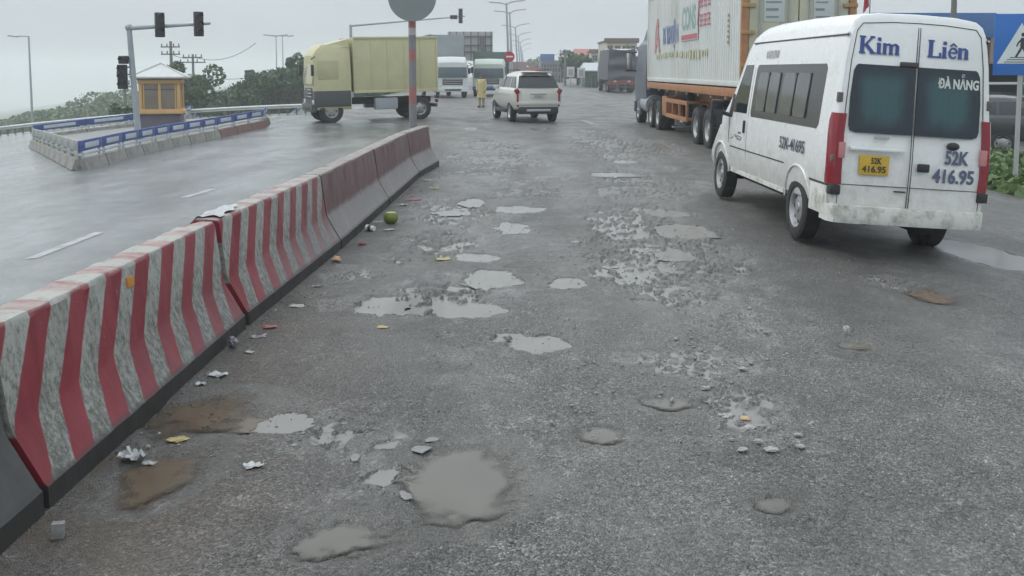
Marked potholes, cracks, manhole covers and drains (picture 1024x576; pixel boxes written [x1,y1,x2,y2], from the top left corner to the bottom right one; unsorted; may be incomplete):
pothole [733,489,815,518]
pothole [654,221,729,239]
pothole [252,406,324,437]
pothole [540,275,595,291]
pothole [455,266,531,293]
pothole [432,303,520,320]
pothole [249,508,428,567]
pothole [348,301,411,318]
pothole [623,392,712,415]
pothole [360,426,559,544]
pothole [496,332,579,356]
